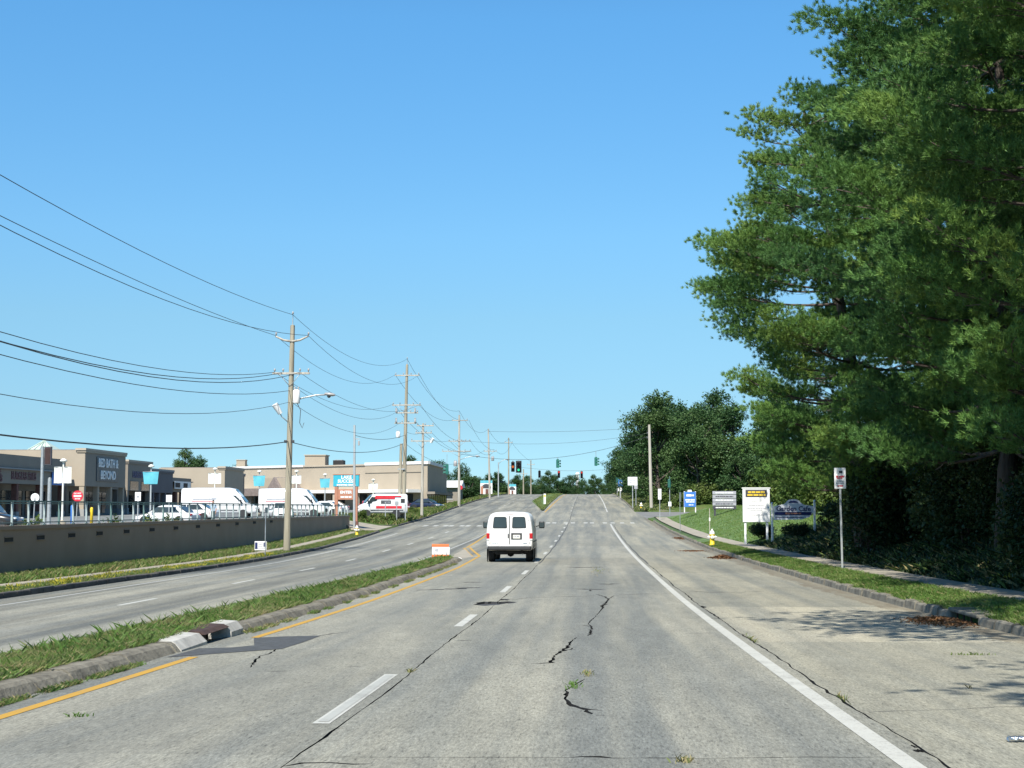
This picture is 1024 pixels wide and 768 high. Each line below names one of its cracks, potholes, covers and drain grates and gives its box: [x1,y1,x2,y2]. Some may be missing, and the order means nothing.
crack [563,680,602,716]
crack [506,589,665,664]
